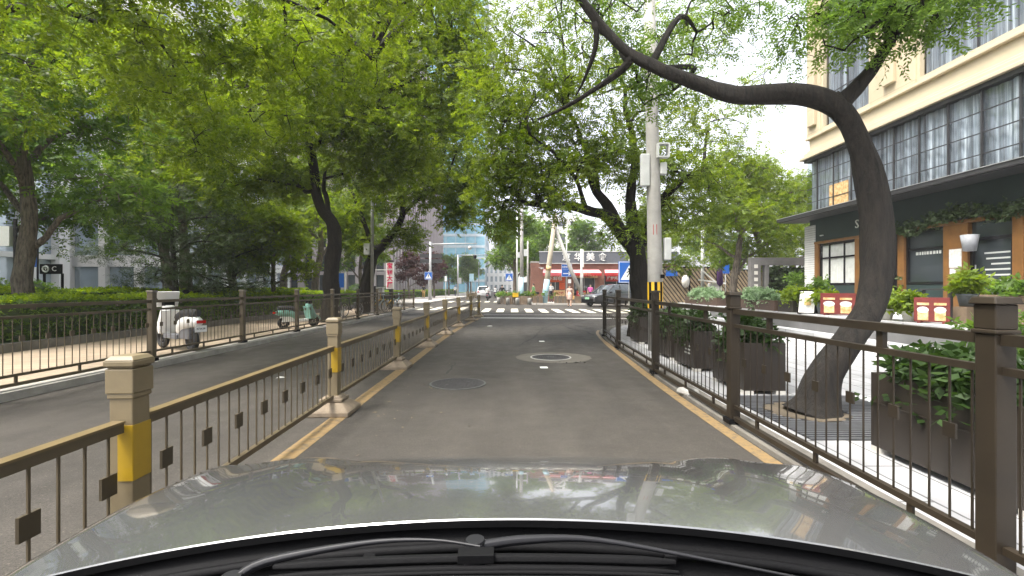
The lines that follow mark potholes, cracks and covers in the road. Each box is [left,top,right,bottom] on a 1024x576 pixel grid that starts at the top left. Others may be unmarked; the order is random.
manhole cover [516,352,592,363]
manhole cover [429,378,486,390]
